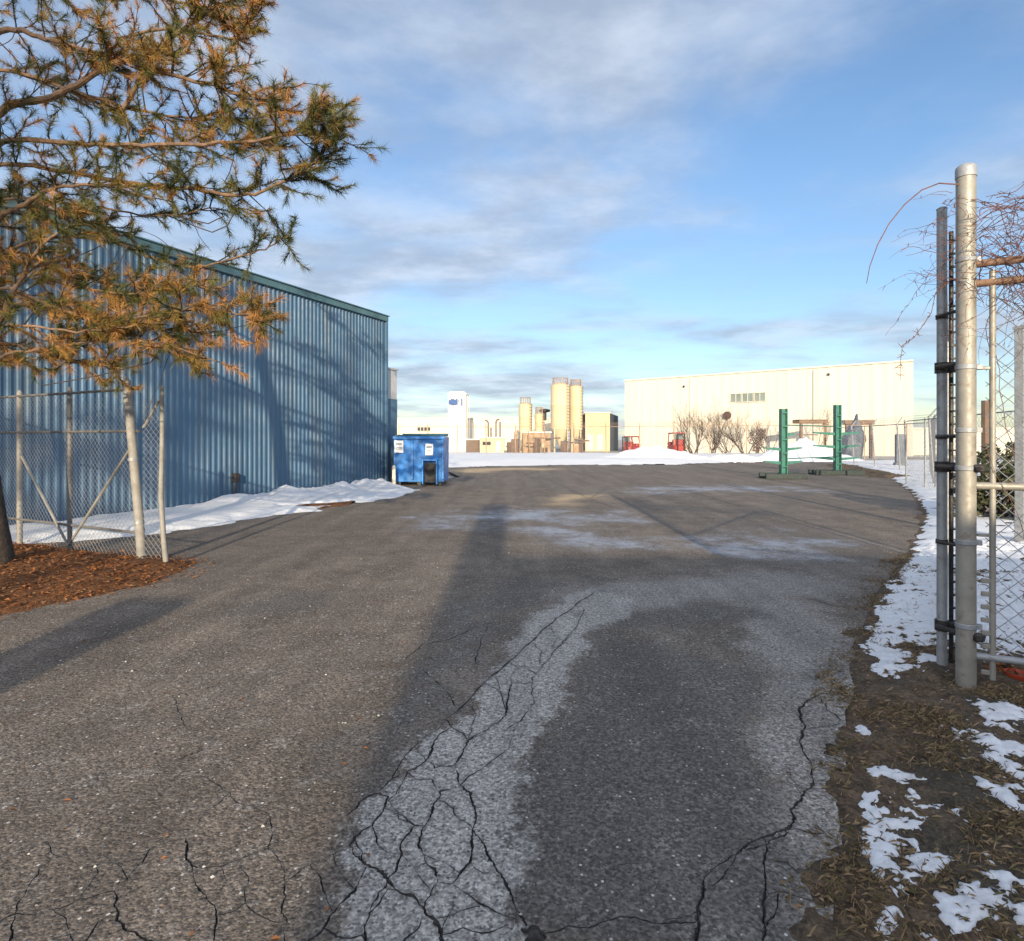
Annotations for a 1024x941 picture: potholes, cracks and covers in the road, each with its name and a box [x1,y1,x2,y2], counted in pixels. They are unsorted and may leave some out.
crack [0,592,841,941]
